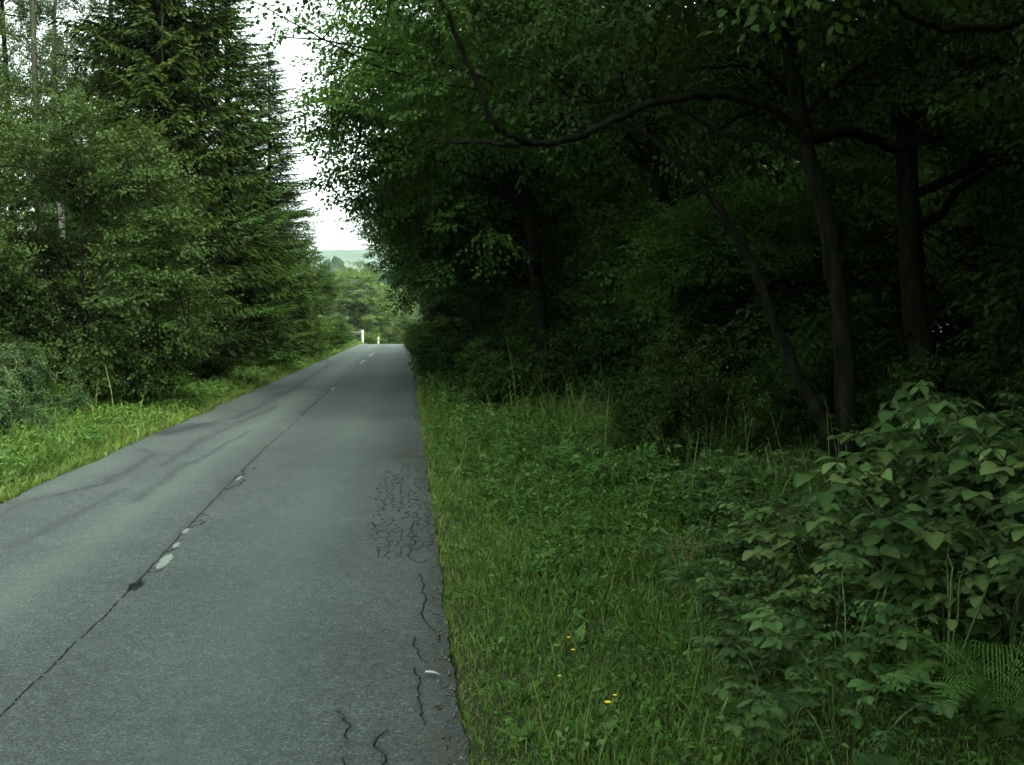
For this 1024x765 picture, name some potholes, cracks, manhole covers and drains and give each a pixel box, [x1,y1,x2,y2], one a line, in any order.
crack [338,710,351,765]
crack [374,731,387,765]
crack [366,462,440,724]
pothole [127,580,145,592]
